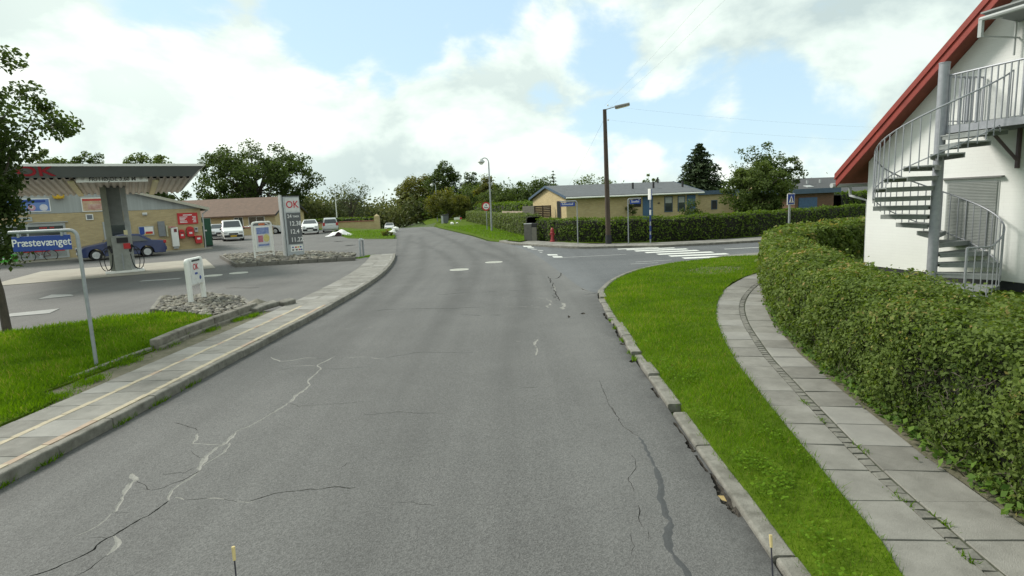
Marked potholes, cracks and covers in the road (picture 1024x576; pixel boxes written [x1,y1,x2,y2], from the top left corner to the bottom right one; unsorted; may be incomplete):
crack [628,456,649,555]
crack [31,350,483,576]
